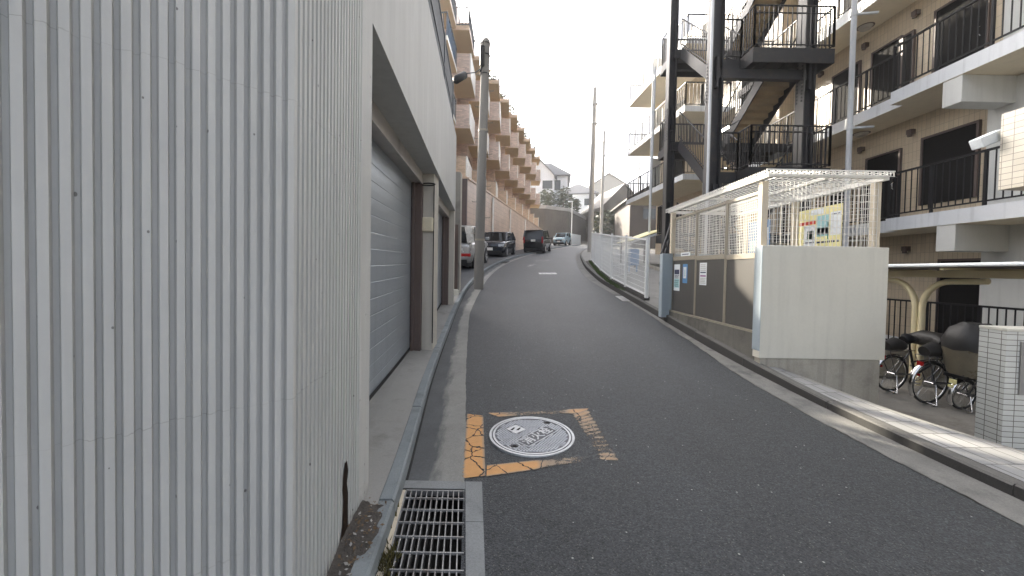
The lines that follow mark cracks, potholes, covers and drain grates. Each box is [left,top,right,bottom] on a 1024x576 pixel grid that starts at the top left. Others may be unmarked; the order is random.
drain grate [376,480,485,576]
manhole cover [489,416,575,458]
